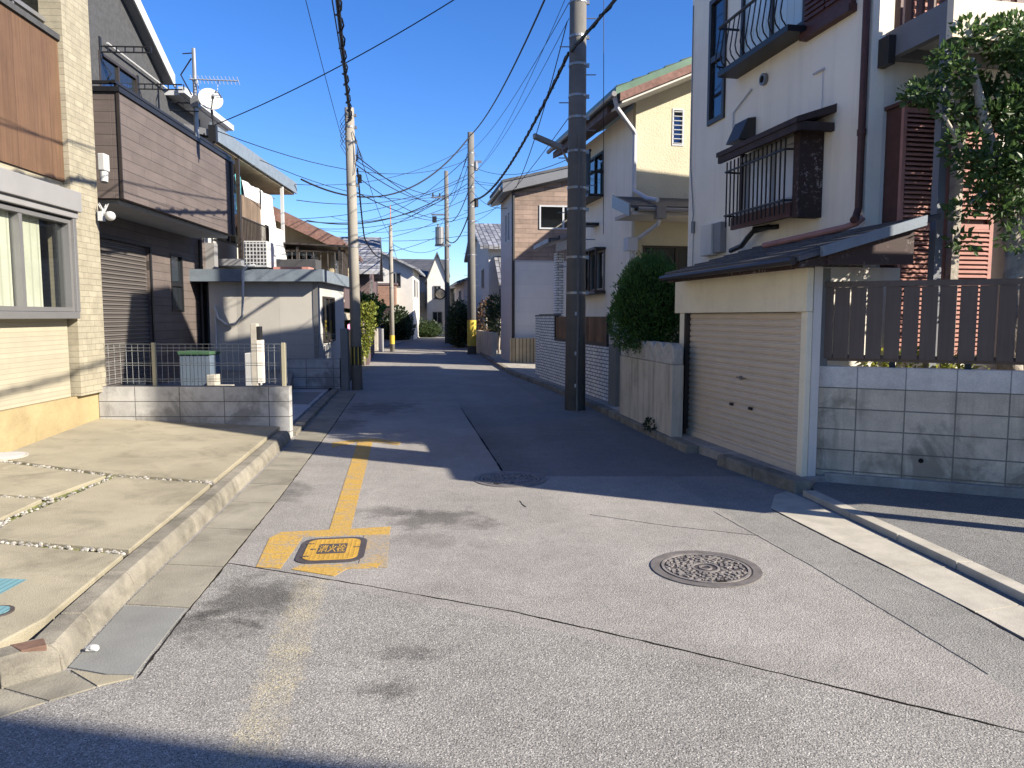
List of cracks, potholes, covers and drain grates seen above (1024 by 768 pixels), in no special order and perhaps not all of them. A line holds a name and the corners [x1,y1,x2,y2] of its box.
manhole cover [473,471,546,487]
manhole cover [651,550,763,588]
